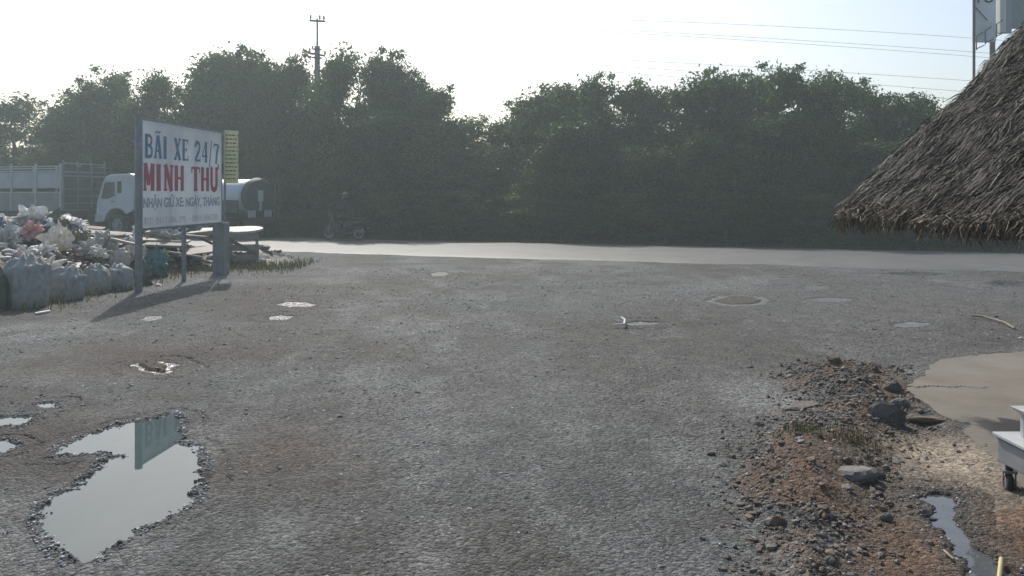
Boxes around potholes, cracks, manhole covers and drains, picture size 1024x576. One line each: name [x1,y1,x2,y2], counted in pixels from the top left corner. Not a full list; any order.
pothole [3,409,231,576]
pothole [5,397,80,417]
pothole [107,356,200,379]
